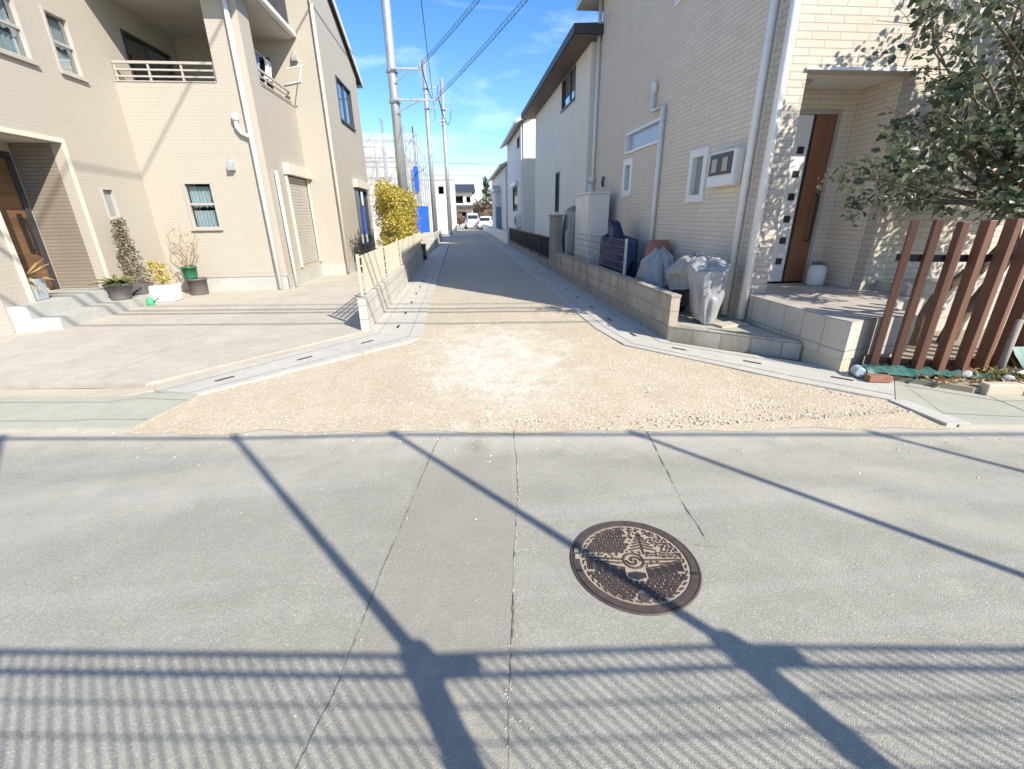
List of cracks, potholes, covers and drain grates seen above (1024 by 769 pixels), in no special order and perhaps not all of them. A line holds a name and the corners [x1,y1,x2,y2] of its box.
manhole cover [570,521,702,616]
